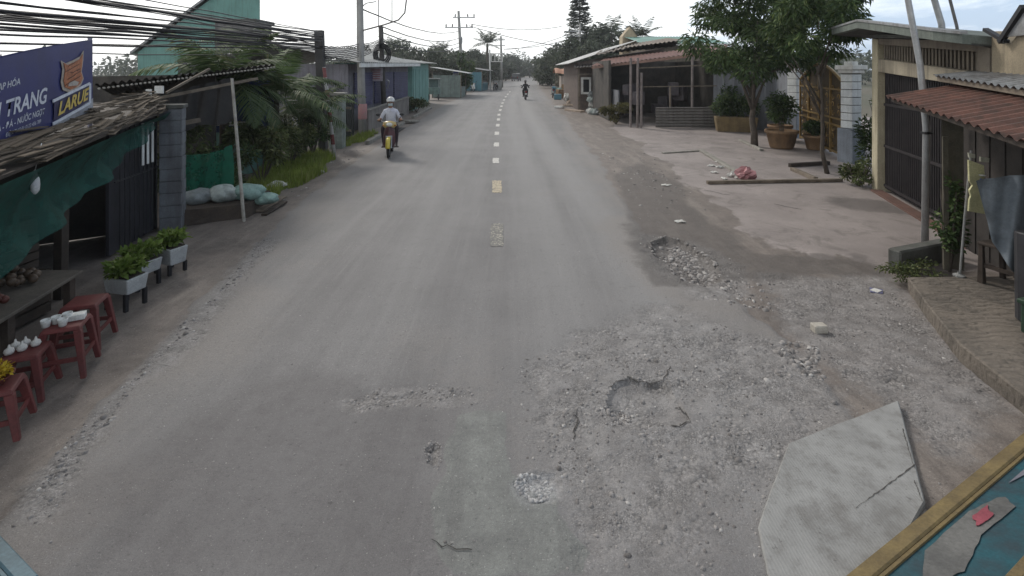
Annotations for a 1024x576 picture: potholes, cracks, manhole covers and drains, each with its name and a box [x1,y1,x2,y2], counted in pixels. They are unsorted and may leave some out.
pothole [513,470,563,504]
pothole [650,236,724,288]
crack [609,367,671,387]
pothole [424,443,441,466]
